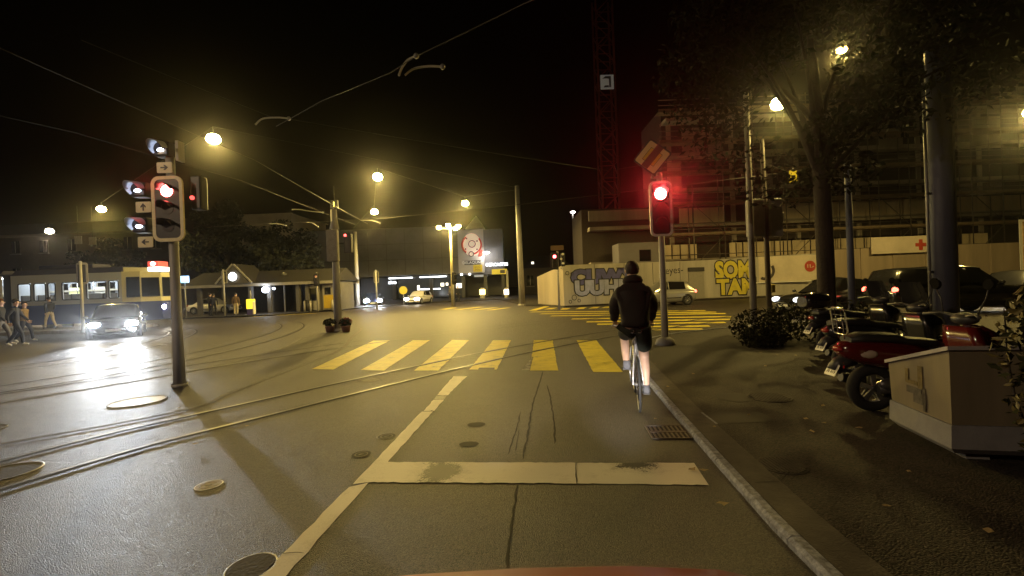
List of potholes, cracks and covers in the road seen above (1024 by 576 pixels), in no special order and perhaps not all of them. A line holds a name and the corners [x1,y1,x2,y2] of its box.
manhole cover [193,480,224,491]
drain grate [645,425,694,439]
manhole cover [222,552,278,576]
crack [508,372,556,459]
crack [505,485,518,566]
manhole cover [0,461,45,481]
manhole cover [106,395,168,408]
manhole cover [746,392,794,403]
